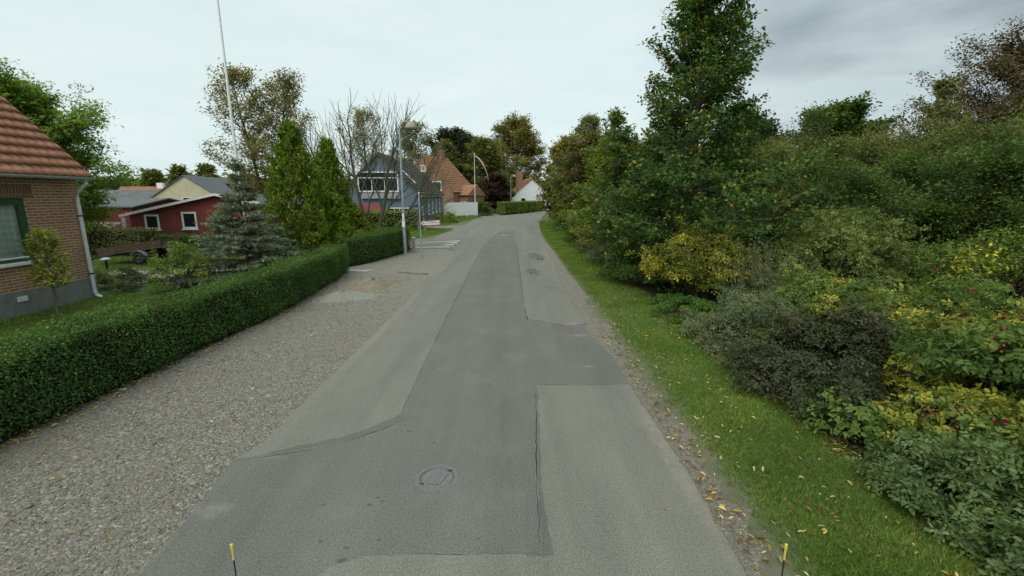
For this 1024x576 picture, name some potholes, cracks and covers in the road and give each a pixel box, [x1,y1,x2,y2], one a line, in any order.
manhole cover [414,464,459,492]
